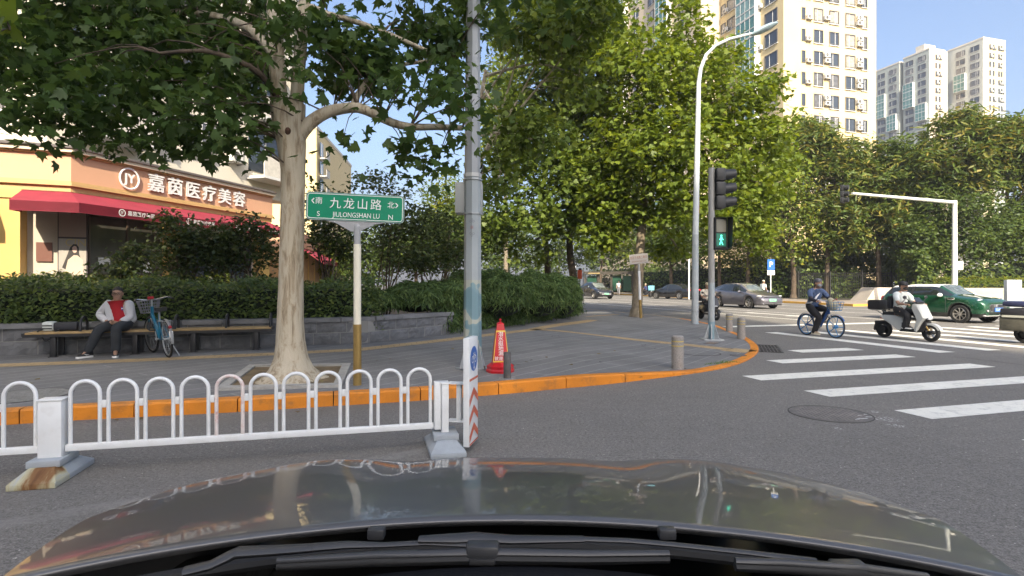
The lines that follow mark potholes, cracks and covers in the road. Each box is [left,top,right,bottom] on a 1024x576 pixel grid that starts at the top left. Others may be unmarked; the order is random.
manhole cover [787,405,875,423]
drain grate [757,344,784,353]
